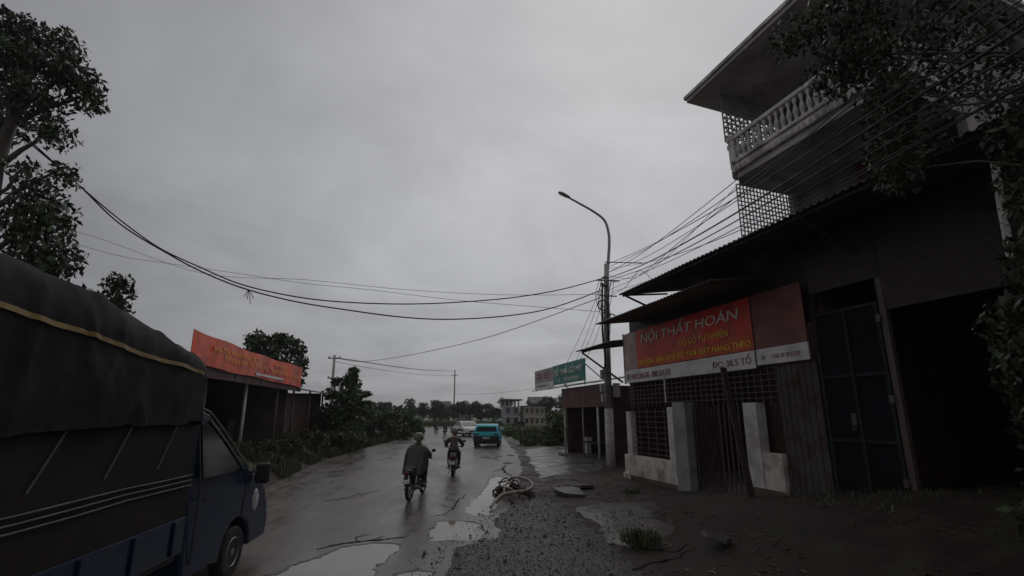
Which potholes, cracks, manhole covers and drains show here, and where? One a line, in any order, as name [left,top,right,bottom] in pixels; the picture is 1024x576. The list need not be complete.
pothole [425,520,487,541]
crack [318,534,403,549]
pothole [261,542,401,576]
